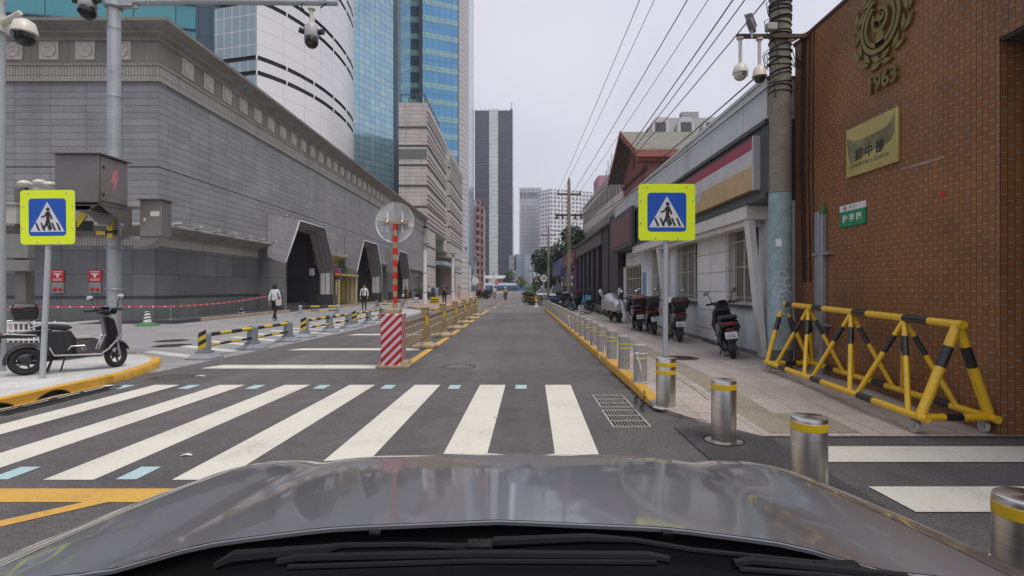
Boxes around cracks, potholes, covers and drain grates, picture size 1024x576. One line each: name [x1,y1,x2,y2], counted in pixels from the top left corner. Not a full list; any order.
drain grate [592,395,634,408]
drain grate [601,410,652,428]
